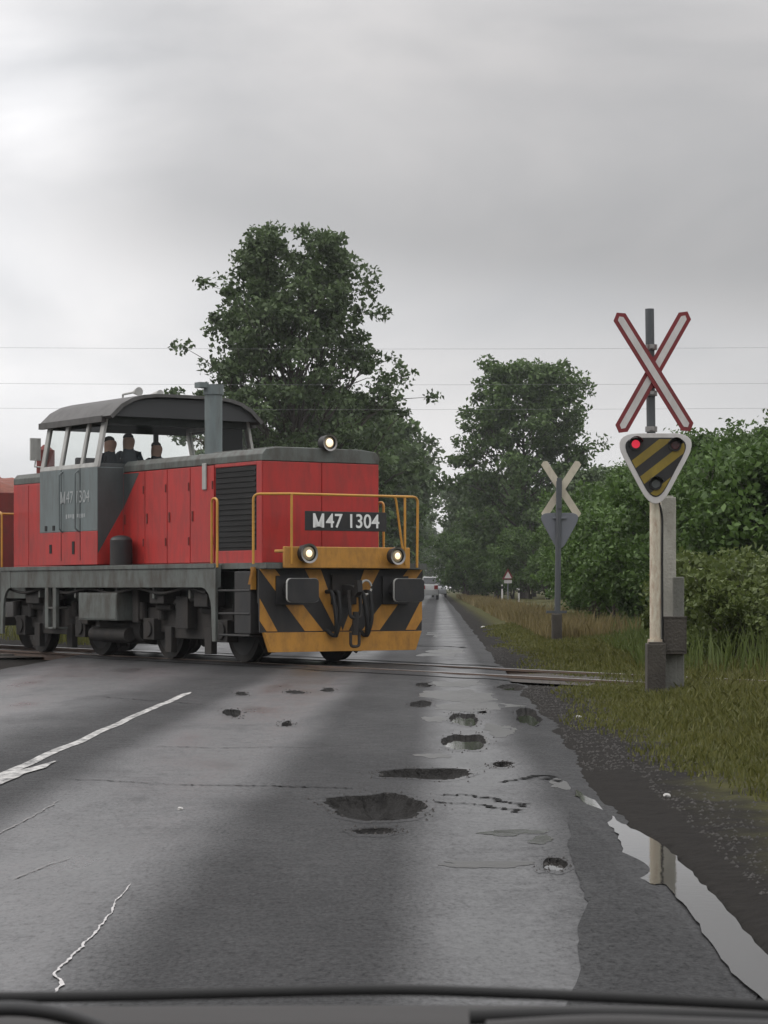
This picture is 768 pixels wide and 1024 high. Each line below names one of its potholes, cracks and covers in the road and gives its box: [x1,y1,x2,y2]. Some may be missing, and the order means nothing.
pothole [444,712,483,727]
pothole [406,700,436,708]
pothole [343,825,405,837]
crack [435,775,560,812]
crack [53,885,129,991]
pothole [316,791,436,823]
crack [77,779,346,788]
pothole [534,854,575,875]
pothole [217,709,245,718]
pothole [512,707,546,727]
pothole [372,767,480,782]
pothole [435,733,491,752]
